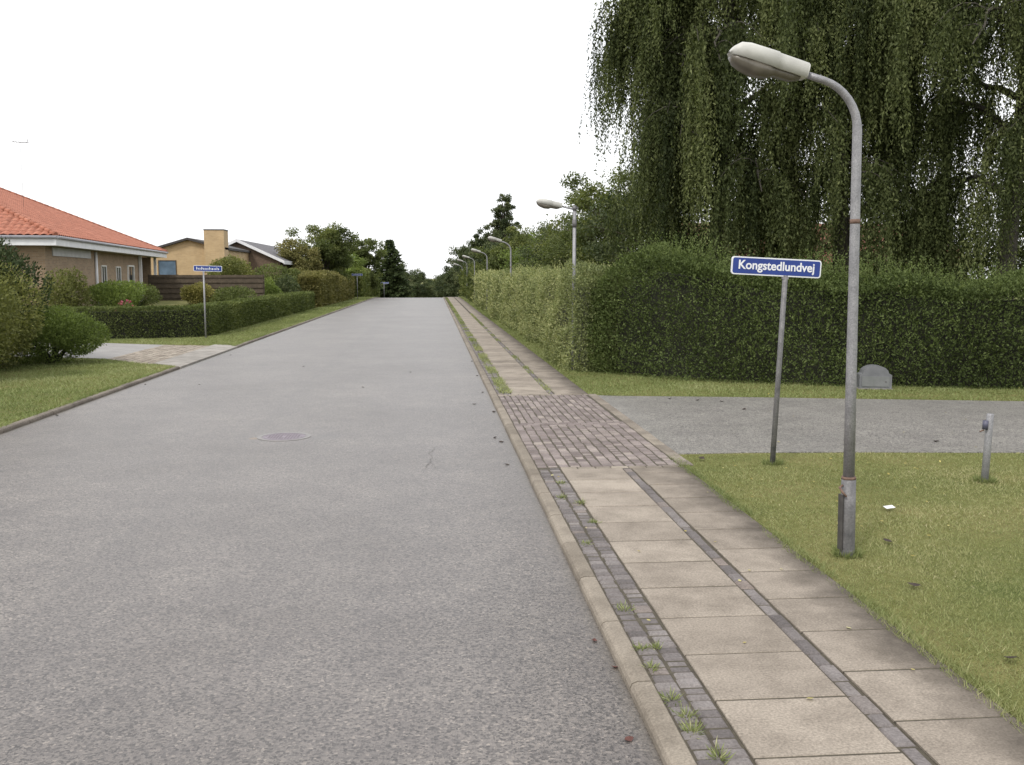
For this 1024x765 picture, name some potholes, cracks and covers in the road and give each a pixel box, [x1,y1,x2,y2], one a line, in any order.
manhole cover [257,432,311,441]
